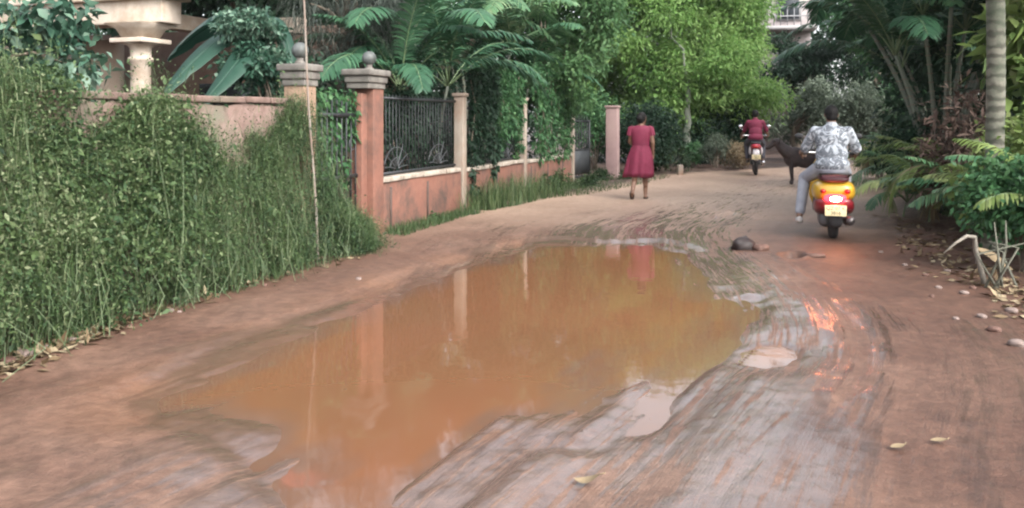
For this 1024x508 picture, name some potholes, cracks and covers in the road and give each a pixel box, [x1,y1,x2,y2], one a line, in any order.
pothole [728,341,813,370]
pothole [145,241,761,508]
pothole [772,250,810,260]
